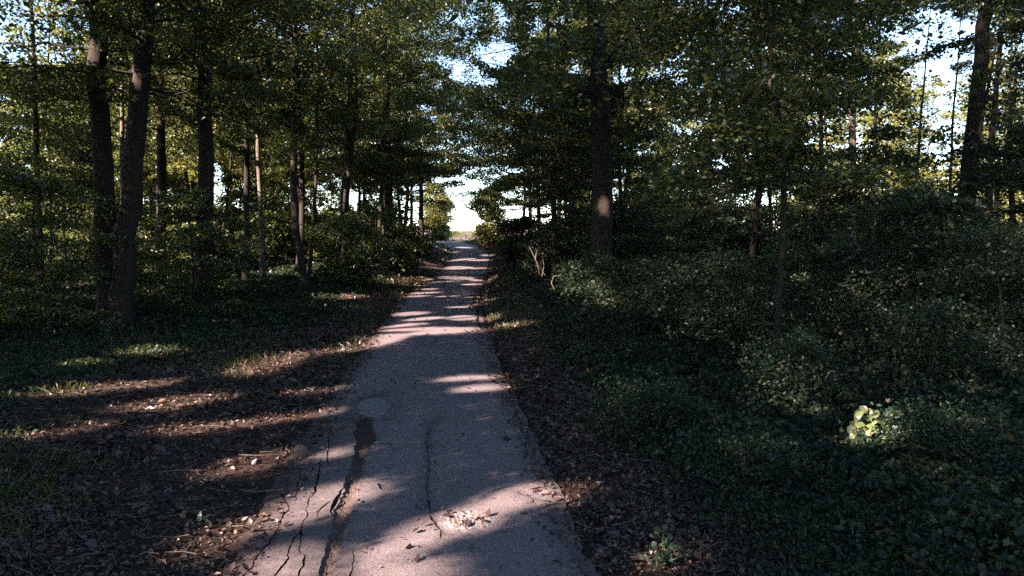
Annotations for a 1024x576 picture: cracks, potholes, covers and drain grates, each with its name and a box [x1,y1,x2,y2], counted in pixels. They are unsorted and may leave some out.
crack [236,427,349,576]
